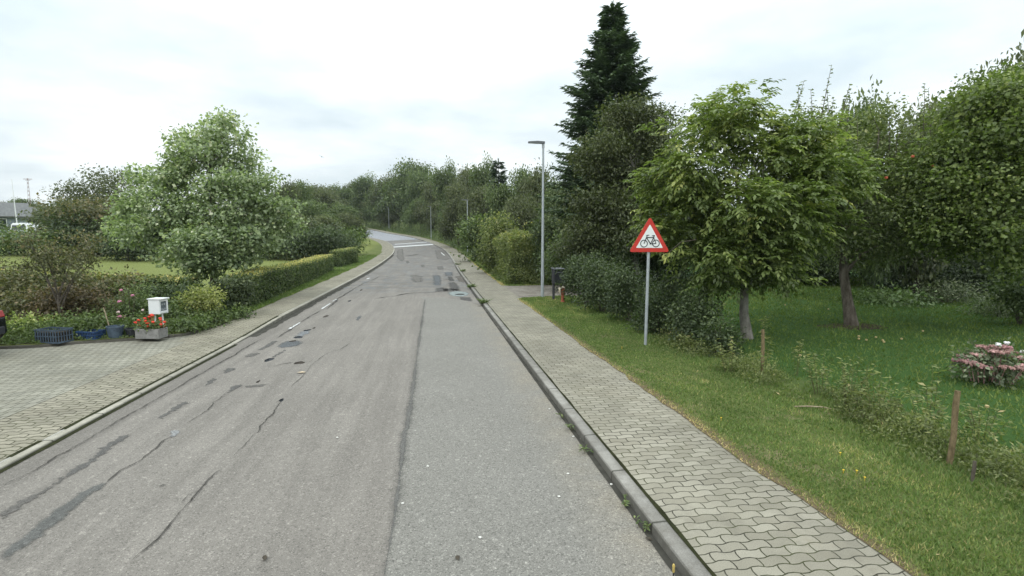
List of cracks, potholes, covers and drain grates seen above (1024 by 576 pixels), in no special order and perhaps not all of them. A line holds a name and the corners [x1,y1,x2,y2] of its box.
crack [132,472,216,560]
